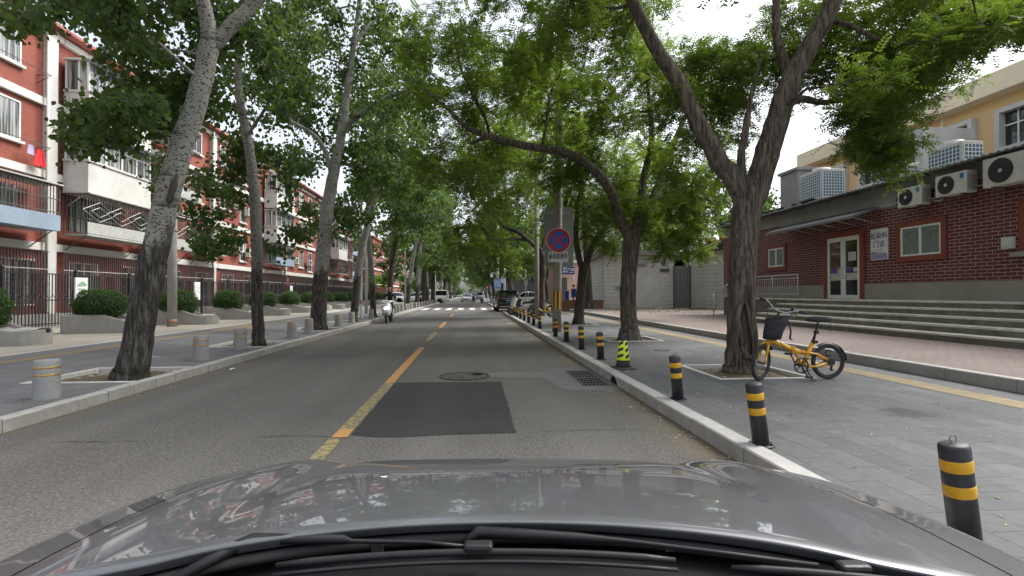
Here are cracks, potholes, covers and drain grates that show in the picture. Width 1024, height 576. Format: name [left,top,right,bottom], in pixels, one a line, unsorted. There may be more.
drain grate [565,370,611,386]
manhole cover [439,372,490,381]
